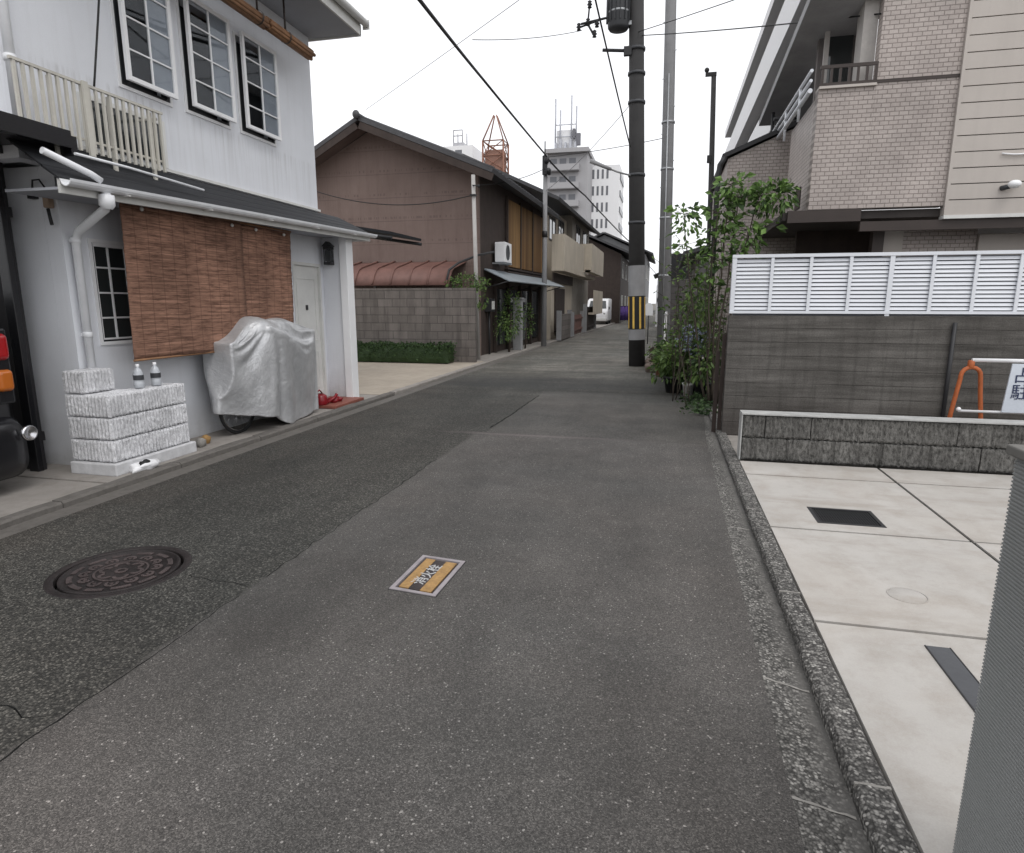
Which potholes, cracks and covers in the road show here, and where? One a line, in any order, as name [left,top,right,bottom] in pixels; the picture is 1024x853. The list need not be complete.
utility cover [886,587,929,604]
drain grate [807,507,887,528]
crack [0,705,50,718]
utility cover [388,555,467,598]
manhole cover [43,546,192,599]
